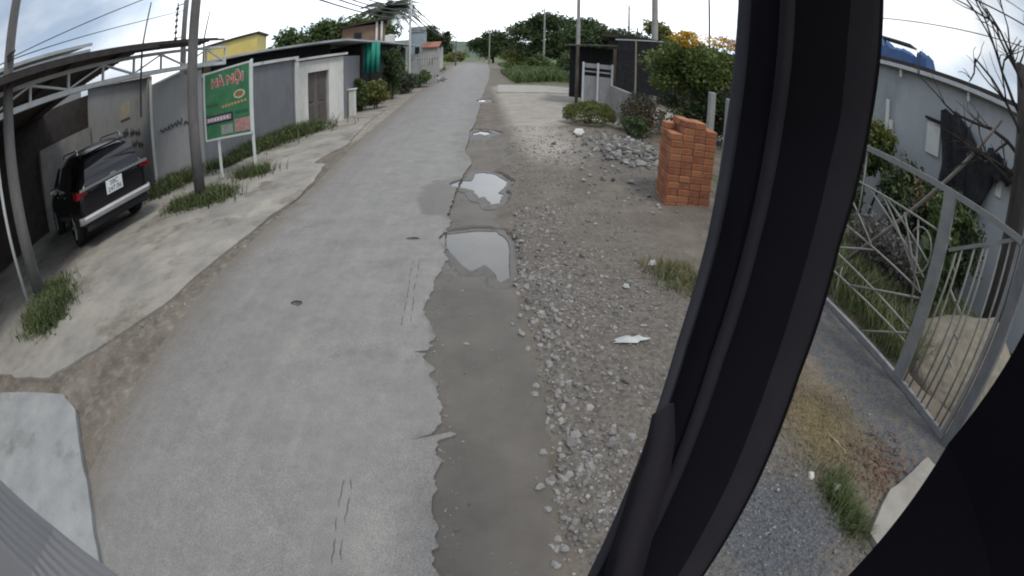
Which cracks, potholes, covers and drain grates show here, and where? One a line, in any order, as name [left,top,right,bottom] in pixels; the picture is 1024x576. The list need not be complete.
pothole [449,171,514,210]
crack [331,479,352,565]
pothole [439,228,521,289]
pothole [469,130,502,138]
